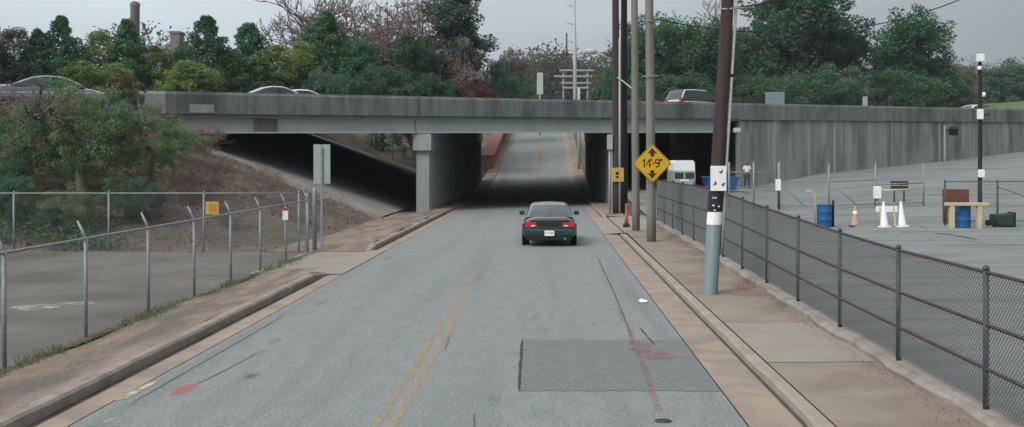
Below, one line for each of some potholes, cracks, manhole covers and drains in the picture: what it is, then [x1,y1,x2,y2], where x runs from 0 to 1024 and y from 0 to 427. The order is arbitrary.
crack [597,257,654,344]
